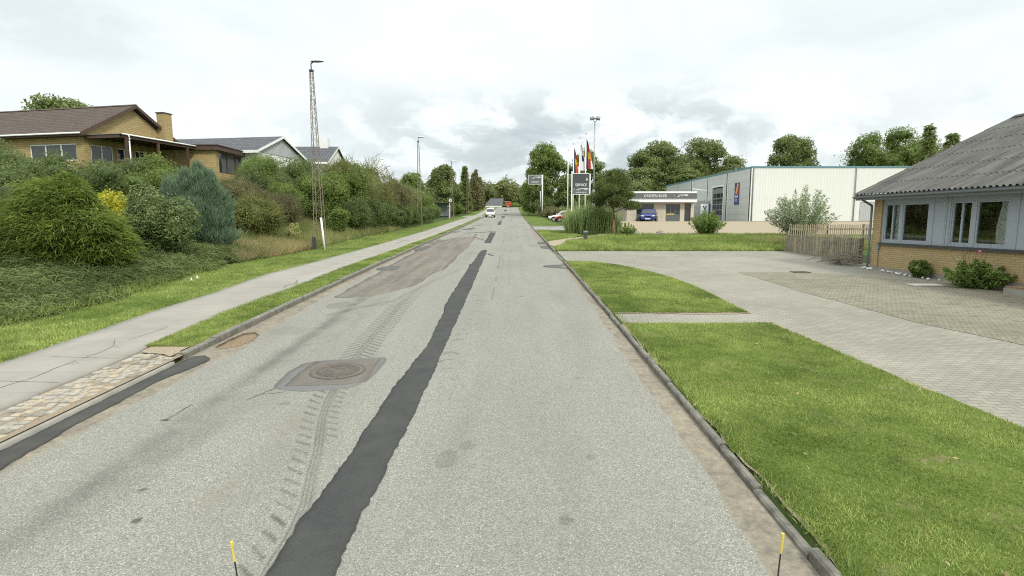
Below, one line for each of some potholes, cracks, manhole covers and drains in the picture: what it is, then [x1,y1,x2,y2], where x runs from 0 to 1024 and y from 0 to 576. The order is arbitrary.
manhole cover [309,362,366,380]
